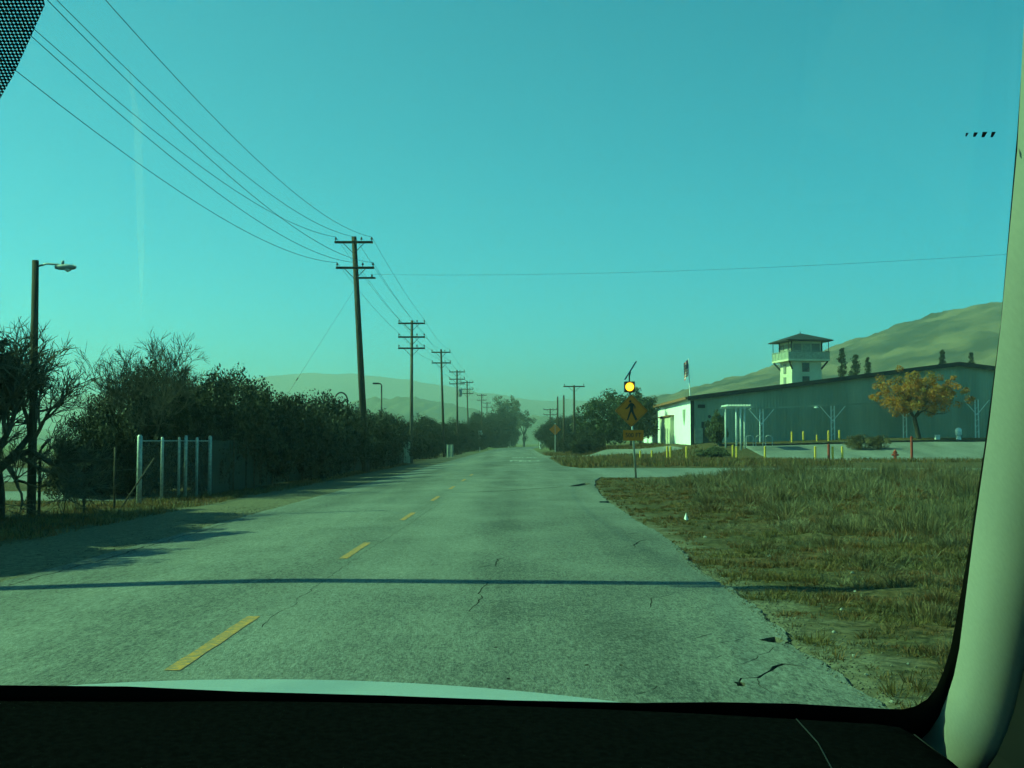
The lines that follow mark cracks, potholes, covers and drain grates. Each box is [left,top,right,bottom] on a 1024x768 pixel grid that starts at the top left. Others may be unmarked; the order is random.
crack [690,634,809,694]
